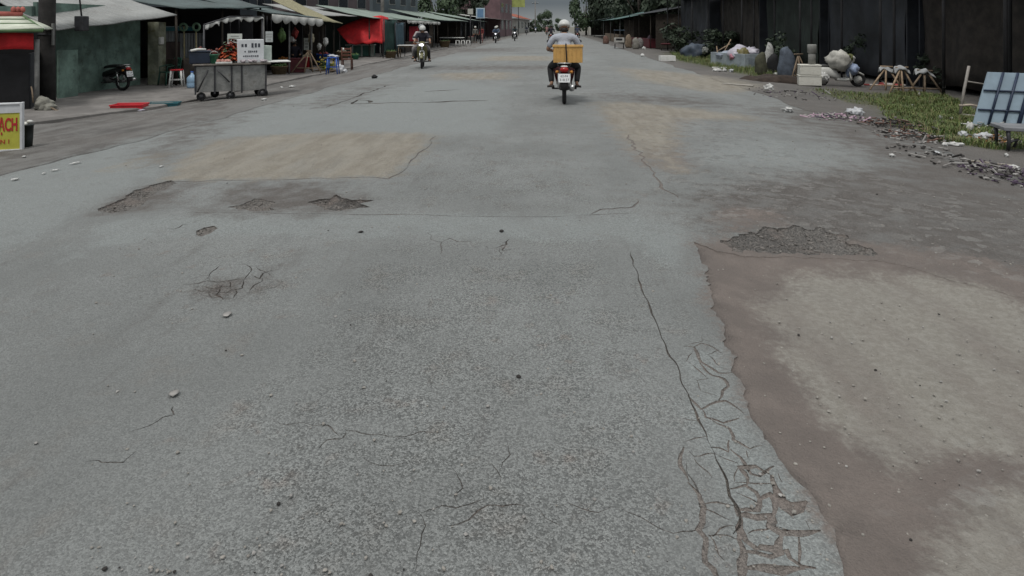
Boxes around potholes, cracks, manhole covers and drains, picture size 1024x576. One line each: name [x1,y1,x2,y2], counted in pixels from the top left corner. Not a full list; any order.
pothole [720,225,877,256]
pothole [98,180,176,213]
crack [413,252,821,576]
crack [591,135,678,214]
pothole [309,194,373,211]
crack [186,263,281,300]
pothole [196,226,217,237]
crack [278,422,441,448]
pothole [231,199,275,211]
